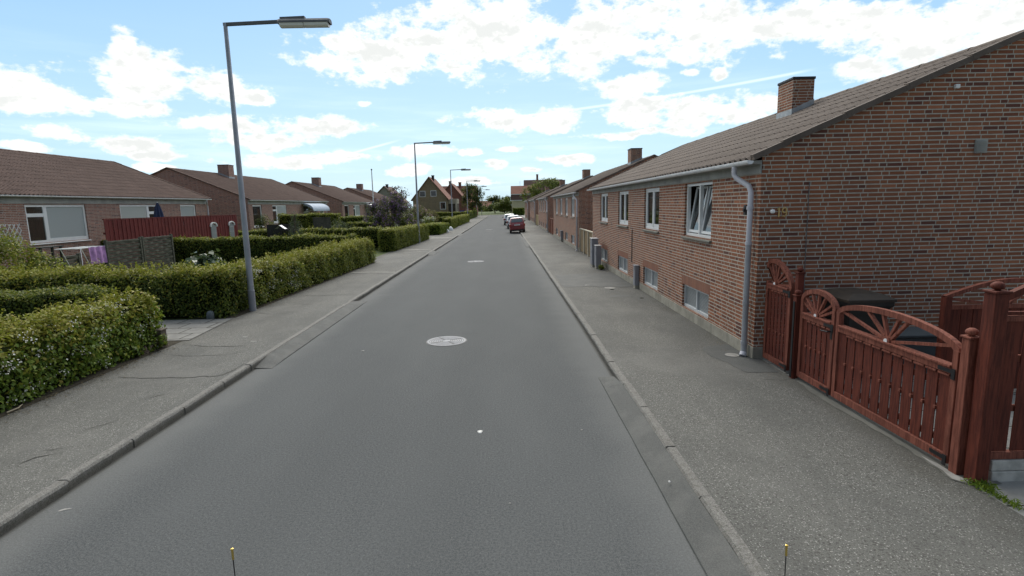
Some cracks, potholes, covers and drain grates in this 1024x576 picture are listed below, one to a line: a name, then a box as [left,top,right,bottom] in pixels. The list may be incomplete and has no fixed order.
crack [124,345,245,399]
manhole cover [426,336,467,347]
